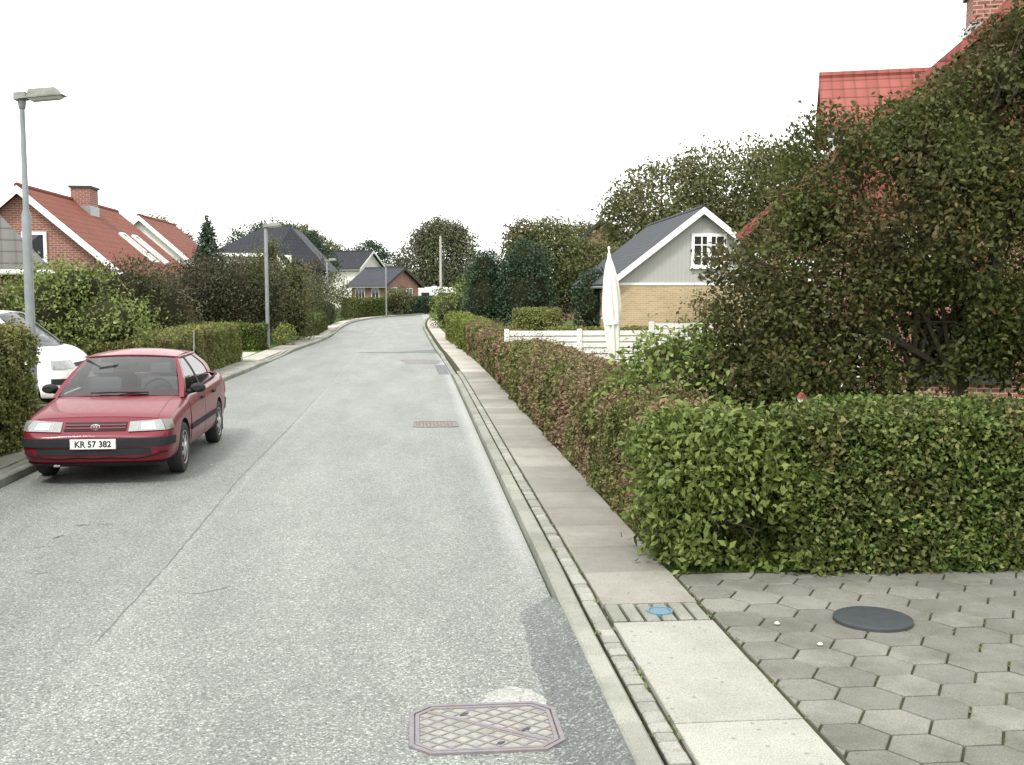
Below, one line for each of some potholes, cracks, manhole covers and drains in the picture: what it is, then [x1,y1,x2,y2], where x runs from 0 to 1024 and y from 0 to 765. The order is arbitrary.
manhole cover [409,701,565,756]
utility cover [647,606,673,620]
manhole cover [833,606,914,633]
